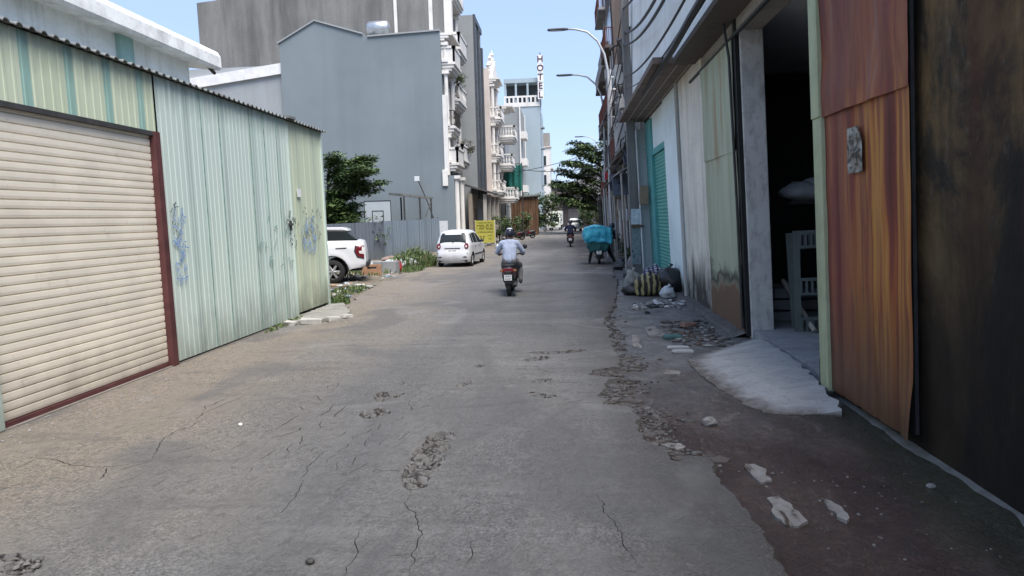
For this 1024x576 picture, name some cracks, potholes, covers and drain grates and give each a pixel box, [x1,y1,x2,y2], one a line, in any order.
crack [597,495,640,566]
crack [389,493,423,576]
pothole [359,407,391,419]
pothole [0,553,45,576]
crack [233,381,443,517]
pothole [400,430,457,490]
crack [1,395,244,491]
pothole [373,391,405,402]
